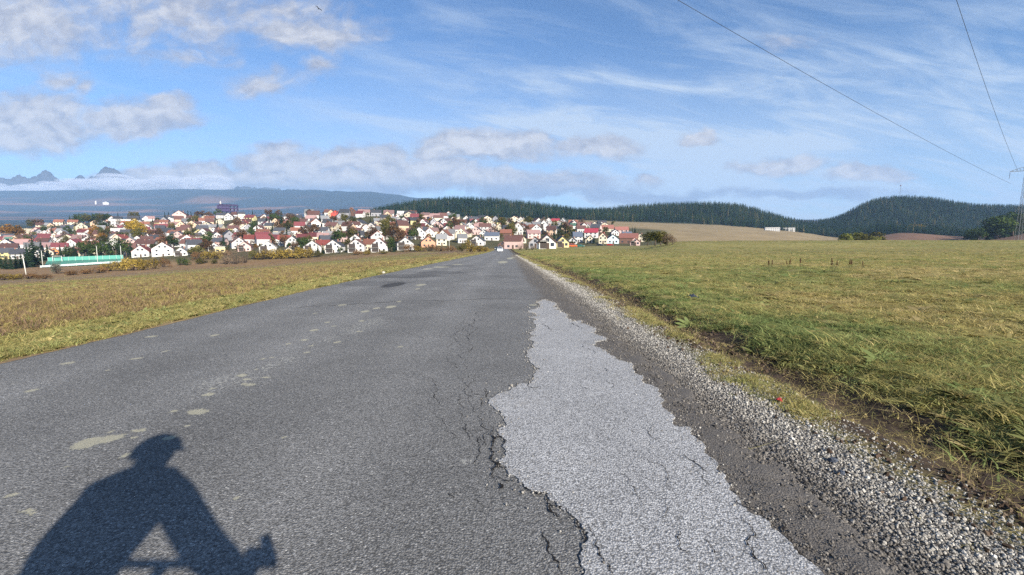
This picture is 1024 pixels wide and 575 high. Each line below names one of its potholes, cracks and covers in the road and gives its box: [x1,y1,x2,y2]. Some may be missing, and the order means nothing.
crack [424,309,613,574]
crack [647,453,824,574]
